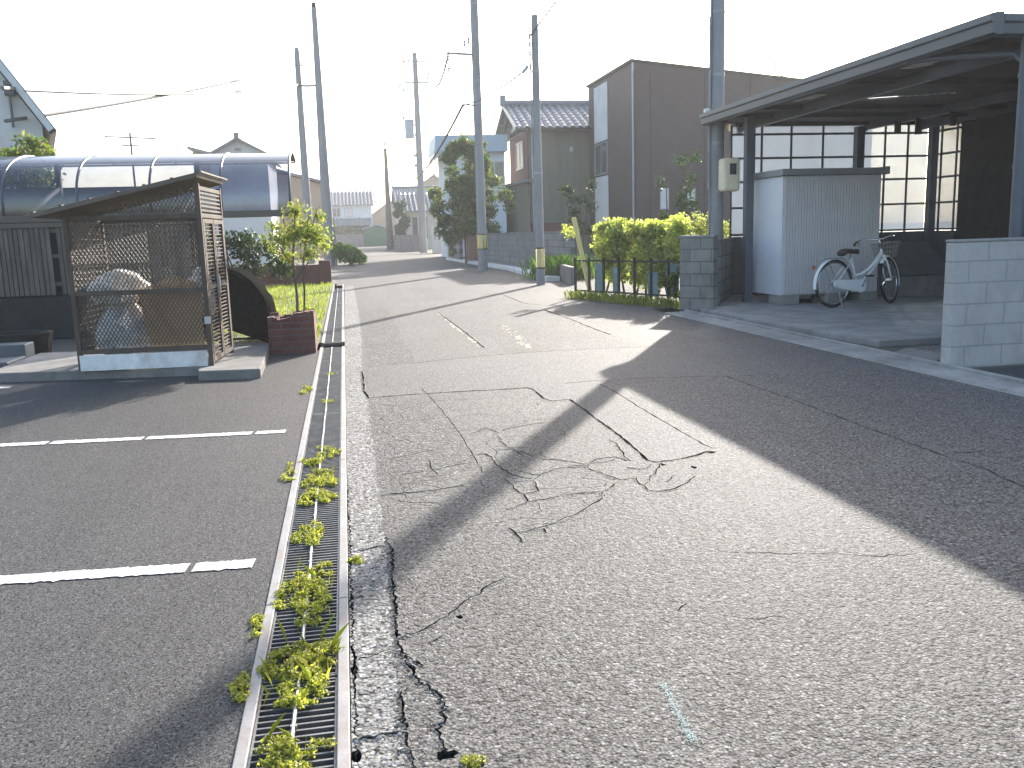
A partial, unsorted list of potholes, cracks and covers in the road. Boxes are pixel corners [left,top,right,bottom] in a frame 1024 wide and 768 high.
drain grate [327,315,342,327]
drain grate [297,412,341,491]
drain grate [319,347,342,373]
crack [380,399,707,542]
drain grate [247,677,338,768]
drain grate [262,488,340,686]
drain grate [329,306,342,315]
crack [347,486,504,768]
drain grate [324,326,342,346]
drain grate [311,372,341,414]
